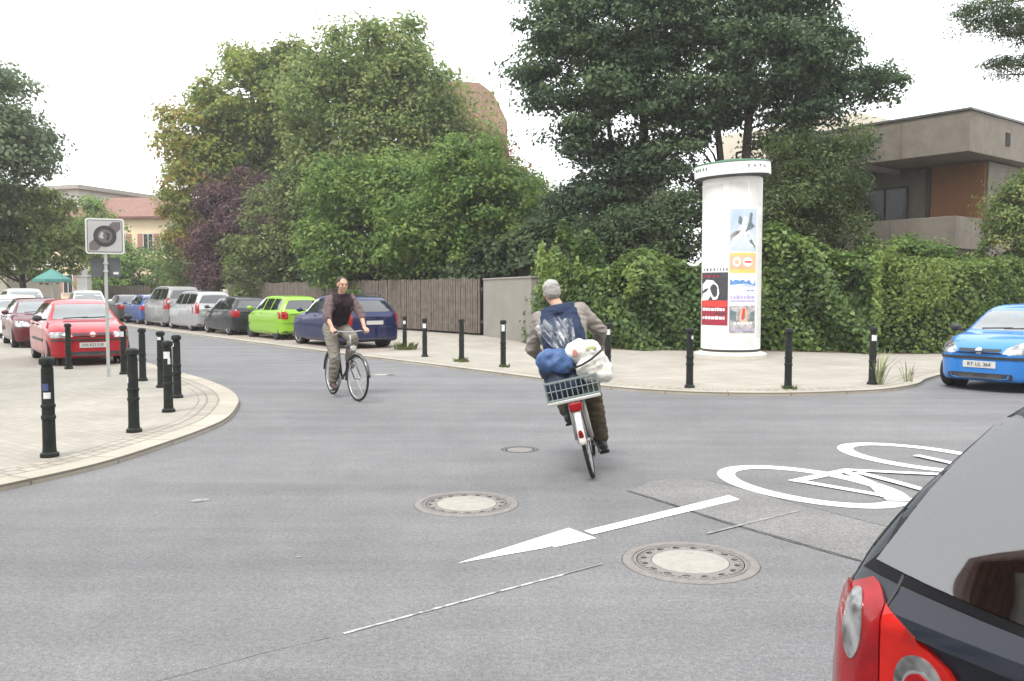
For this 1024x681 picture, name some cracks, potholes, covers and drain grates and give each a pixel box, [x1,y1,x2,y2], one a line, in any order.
manhole cover [414,491,518,517]
manhole cover [622,542,760,585]
